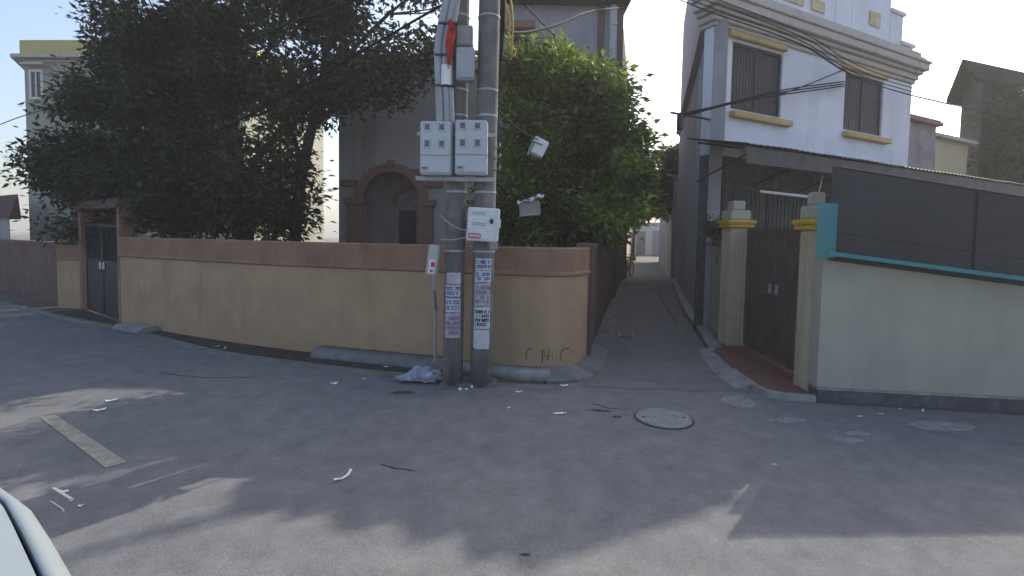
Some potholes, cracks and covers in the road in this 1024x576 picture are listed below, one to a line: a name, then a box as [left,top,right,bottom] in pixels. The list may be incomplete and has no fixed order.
manhole cover [634,408,695,430]
